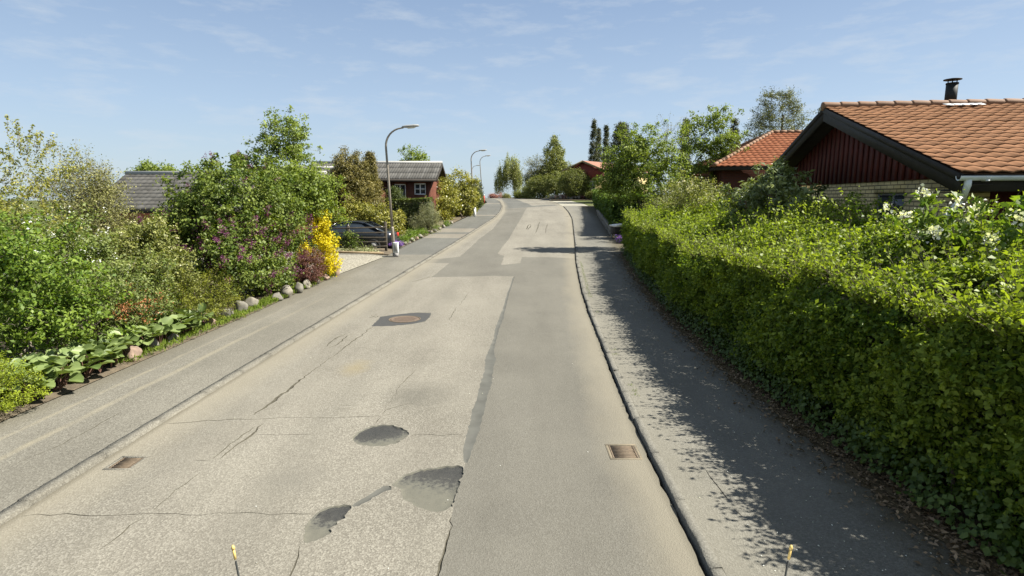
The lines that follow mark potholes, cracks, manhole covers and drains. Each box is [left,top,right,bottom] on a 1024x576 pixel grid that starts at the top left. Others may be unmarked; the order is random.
drain grate [102,456,149,470]
manhole cover [372,313,431,326]
drain grate [605,444,643,460]
crack [26,314,413,550]
